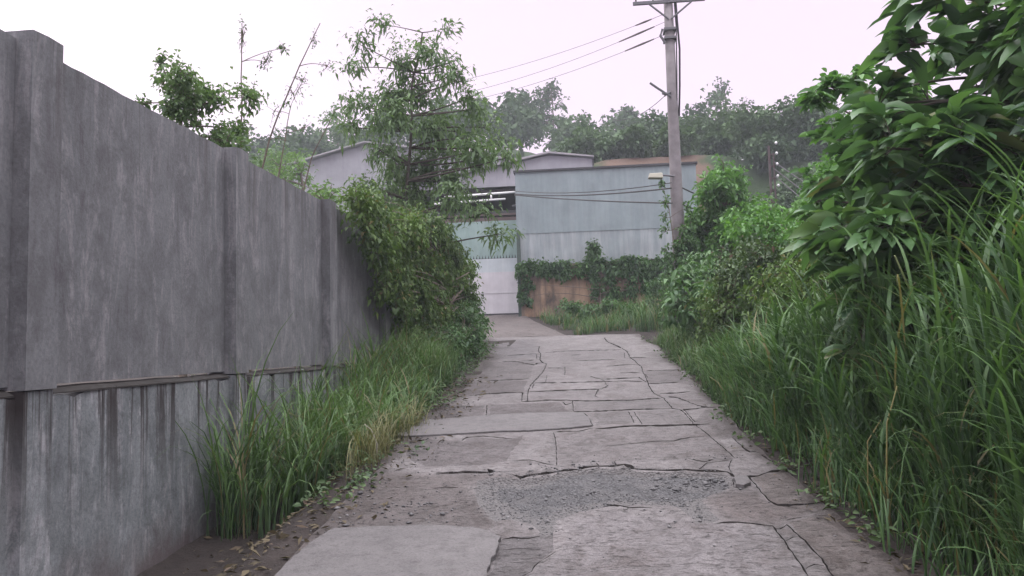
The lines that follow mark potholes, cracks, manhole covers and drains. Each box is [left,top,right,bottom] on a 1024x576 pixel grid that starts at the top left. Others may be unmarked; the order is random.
crack [505,536,555,576]
pothole [473,467,733,538]
crack [434,338,825,526]
